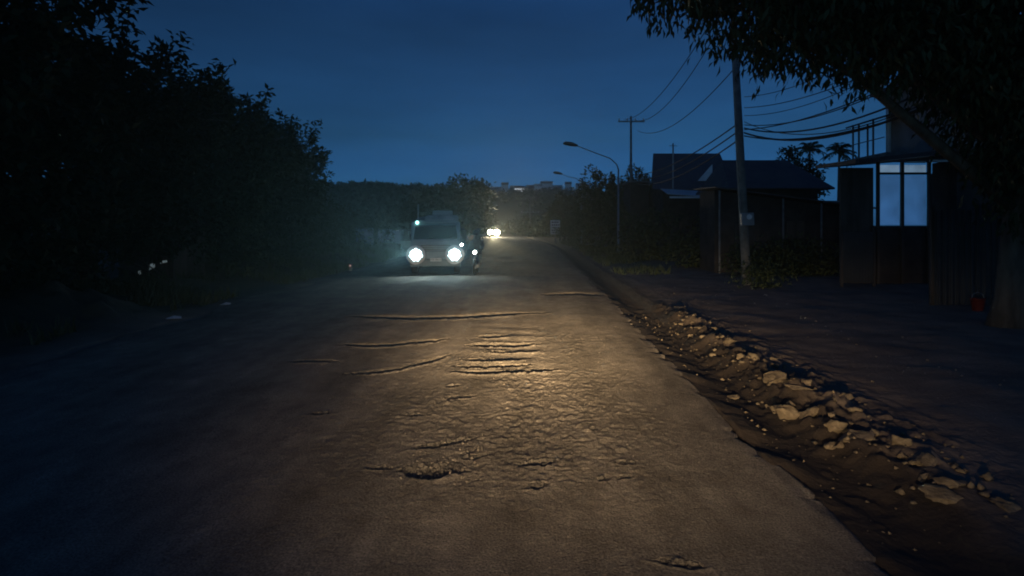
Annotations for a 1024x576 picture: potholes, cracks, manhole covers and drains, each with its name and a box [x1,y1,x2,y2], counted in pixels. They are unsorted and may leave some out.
pothole [397,459,470,480]
pothole [654,557,706,570]
crack [293,291,609,375]
